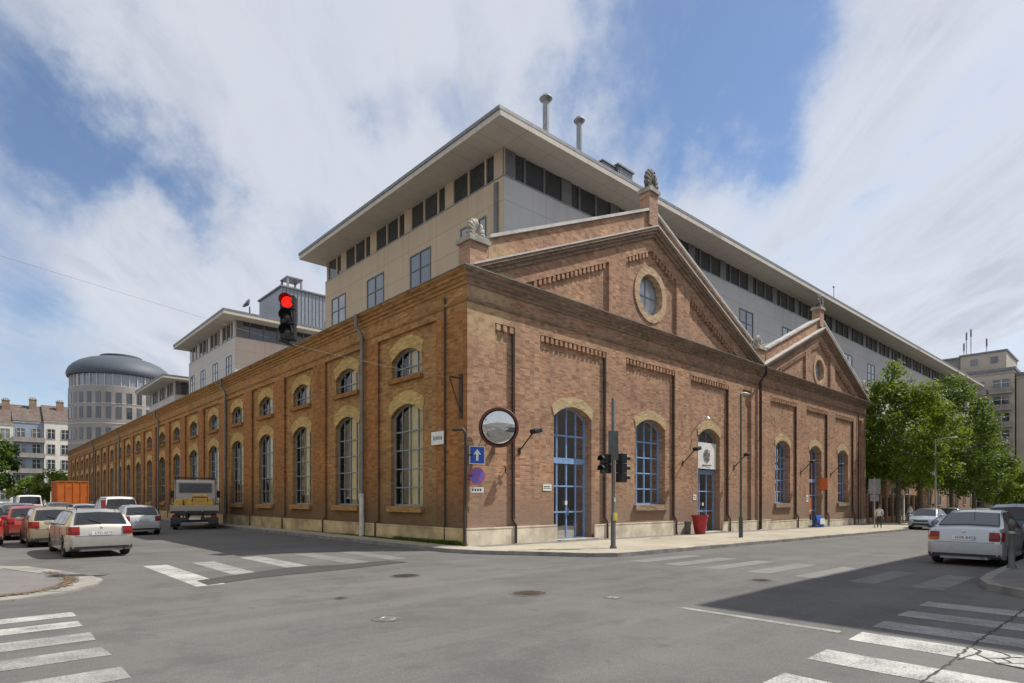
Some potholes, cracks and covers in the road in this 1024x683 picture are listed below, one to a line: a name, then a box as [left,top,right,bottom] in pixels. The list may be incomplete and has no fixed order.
crack [919,609,1024,683]
